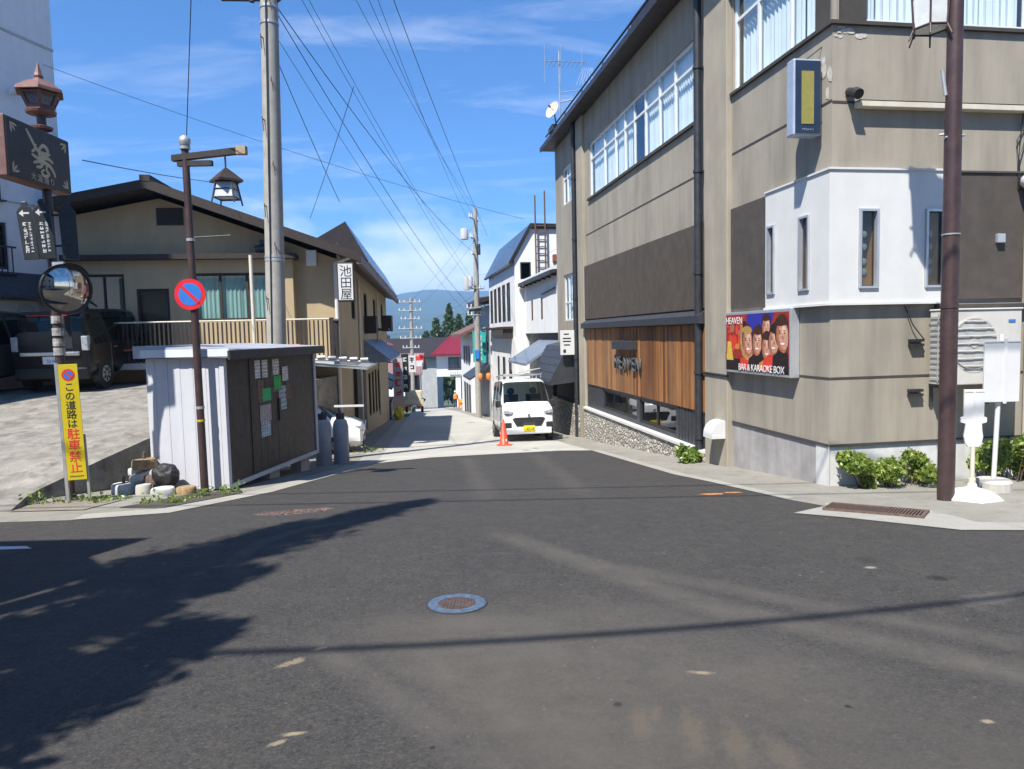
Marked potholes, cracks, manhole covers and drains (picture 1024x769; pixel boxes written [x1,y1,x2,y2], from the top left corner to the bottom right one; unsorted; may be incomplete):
manhole cover [426,593,488,614]
drain grate [822,502,930,519]
